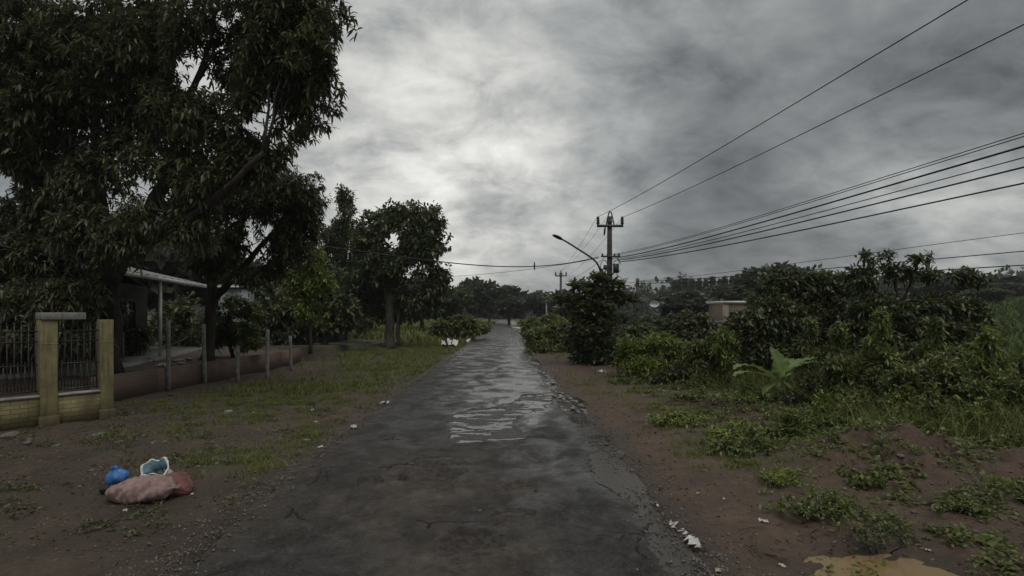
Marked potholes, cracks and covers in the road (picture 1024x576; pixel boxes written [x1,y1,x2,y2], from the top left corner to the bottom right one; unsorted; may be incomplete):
crack [305,470,329,486]
crack [378,458,419,471]
pothole [538,373,558,390]
crack [604,523,654,560]
pothole [550,389,588,423]
crack [285,506,309,521]
crack [416,520,476,529]
